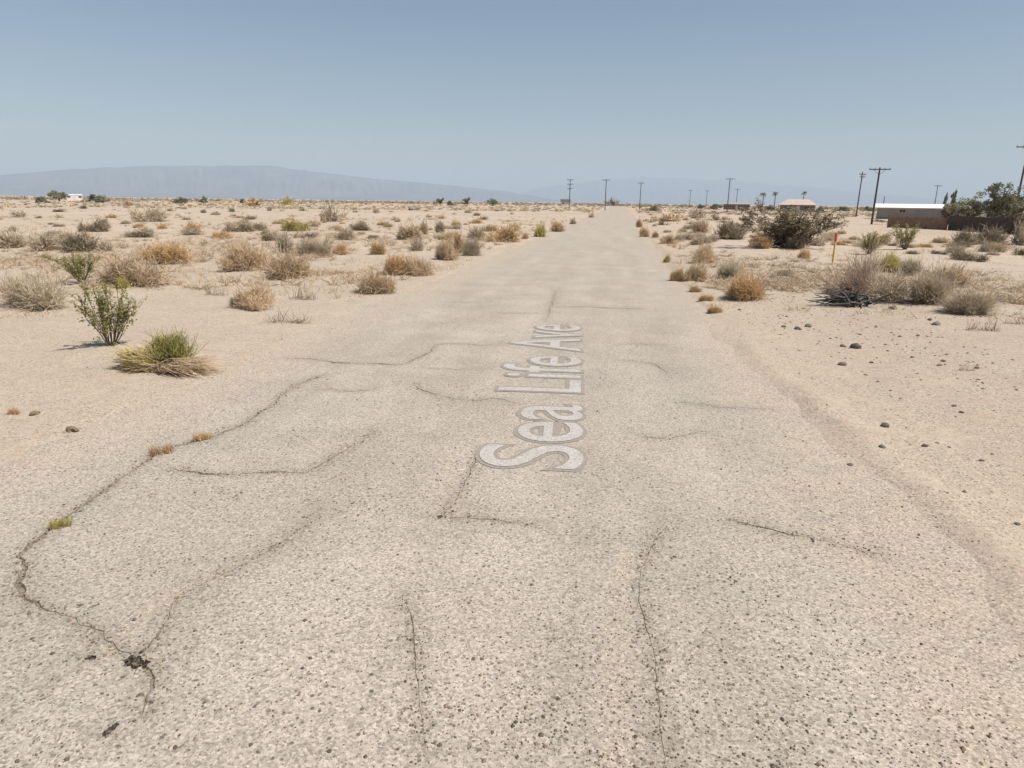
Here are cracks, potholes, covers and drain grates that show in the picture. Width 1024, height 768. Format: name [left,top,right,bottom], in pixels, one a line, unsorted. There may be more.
crack [448,458,523,524]
crack [406,600,426,748]
crack [729,519,882,555]
crack [638,528,666,768]
crack [289,344,486,370]
crack [13,374,324,714]
crack [176,431,375,475]
